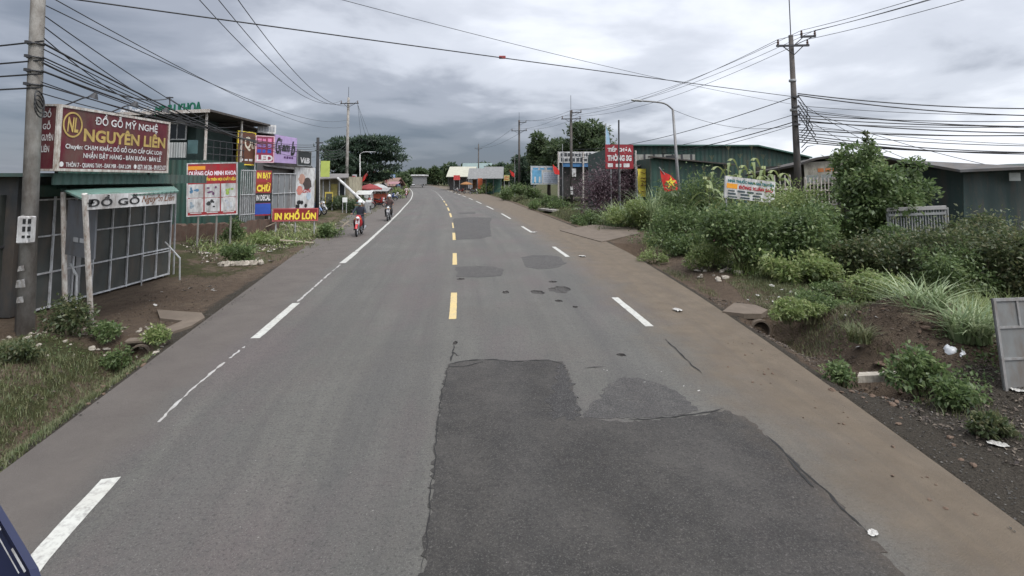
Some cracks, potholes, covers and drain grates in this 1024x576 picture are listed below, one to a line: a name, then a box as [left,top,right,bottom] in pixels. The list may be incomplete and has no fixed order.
crack [628,408,722,420]
